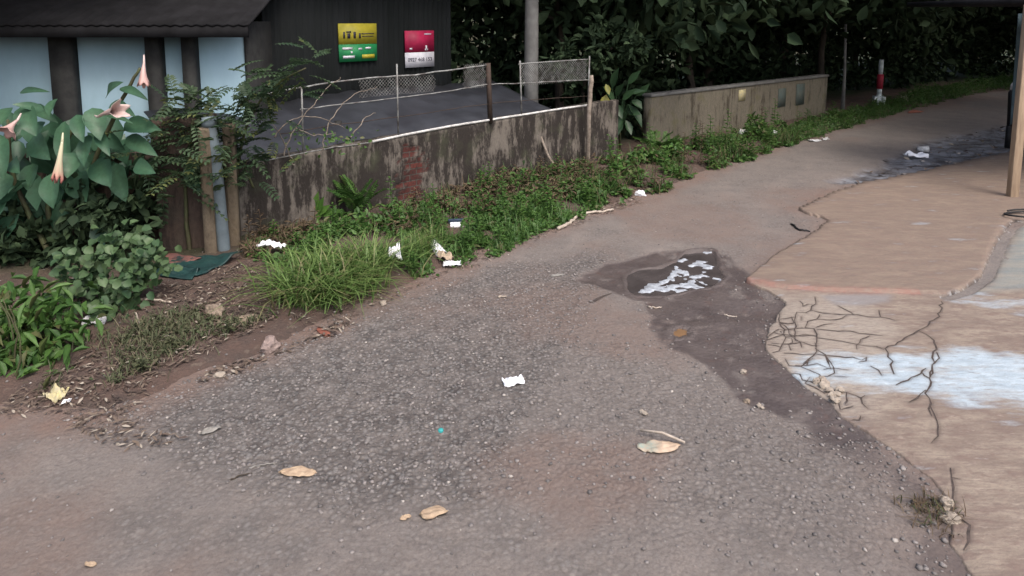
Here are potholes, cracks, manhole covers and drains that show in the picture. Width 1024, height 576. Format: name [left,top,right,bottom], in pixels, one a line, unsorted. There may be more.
crack [879,301,943,443]
crack [950,468,971,550]
pothole [621,247,732,298]
crack [768,298,893,420]
